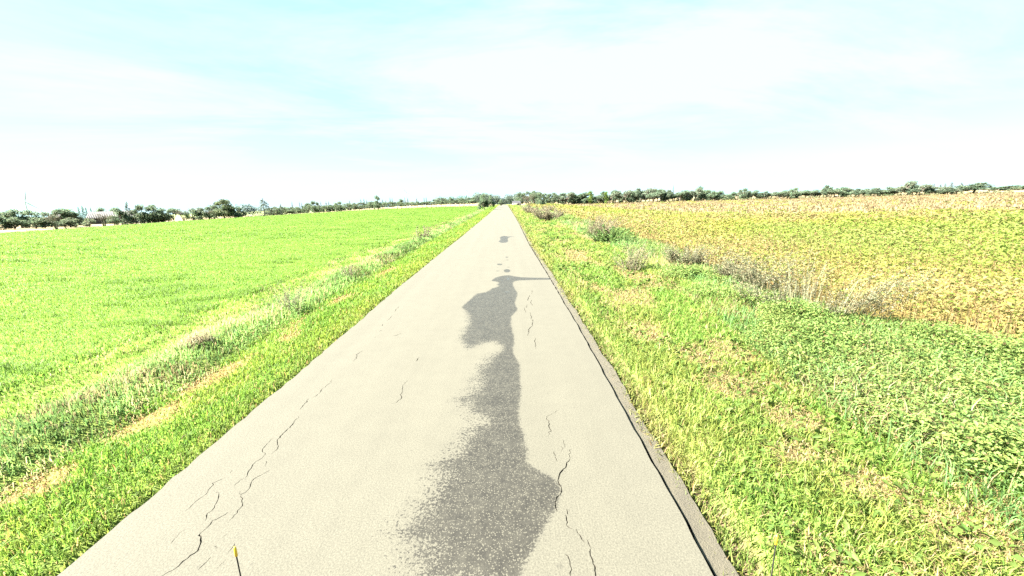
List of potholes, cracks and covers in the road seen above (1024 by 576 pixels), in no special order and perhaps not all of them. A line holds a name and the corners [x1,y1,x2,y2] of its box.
crack [164,380,332,575]
crack [519,224,715,576]
